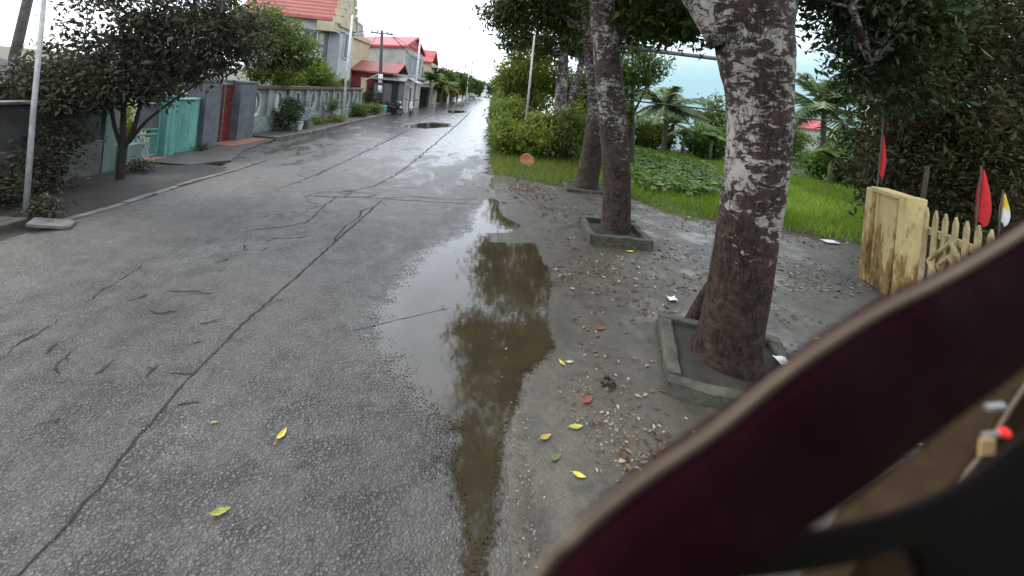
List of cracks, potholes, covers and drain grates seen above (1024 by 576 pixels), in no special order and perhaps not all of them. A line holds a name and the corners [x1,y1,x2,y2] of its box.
crack [0,112,479,576]
